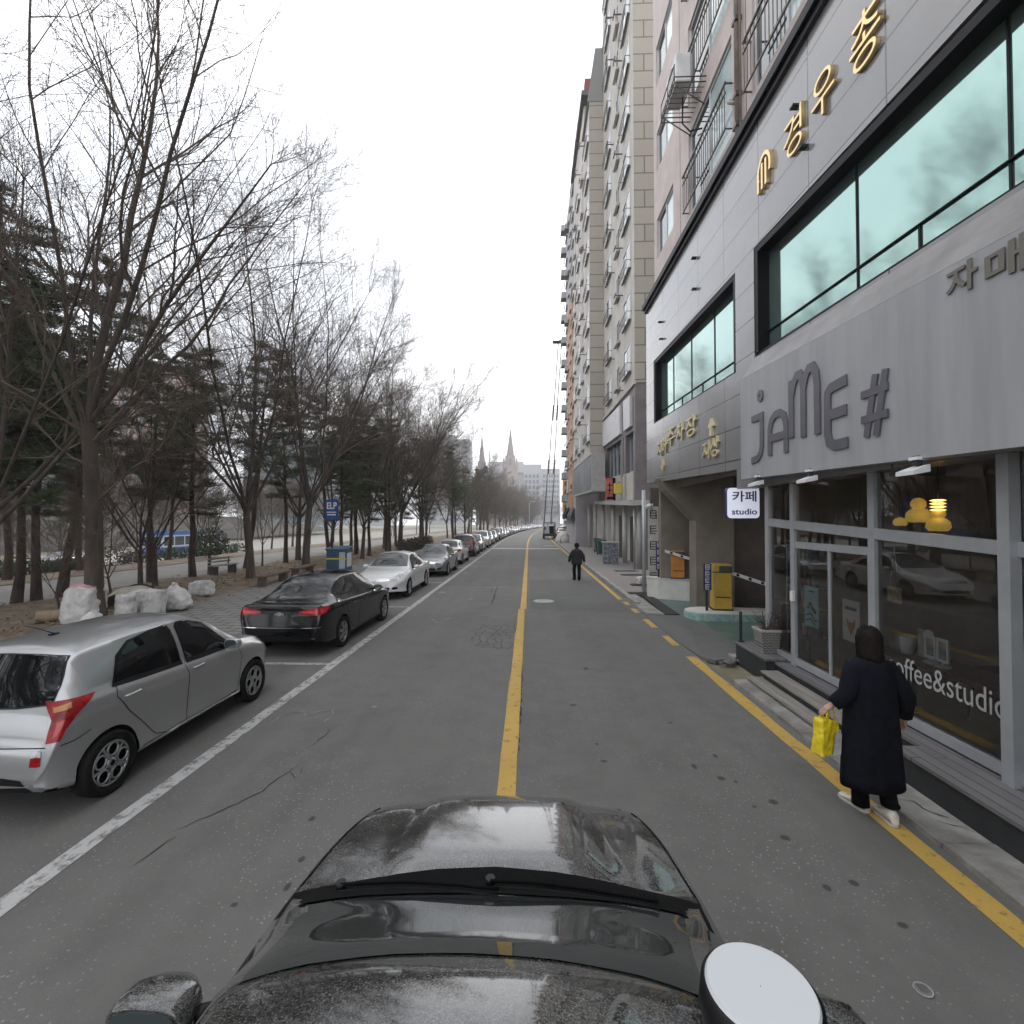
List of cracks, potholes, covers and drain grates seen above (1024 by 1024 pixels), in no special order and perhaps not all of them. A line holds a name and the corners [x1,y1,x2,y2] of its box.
utility cover [913,981,934,998]
crack [171,731,329,832]
crack [473,625,516,649]
